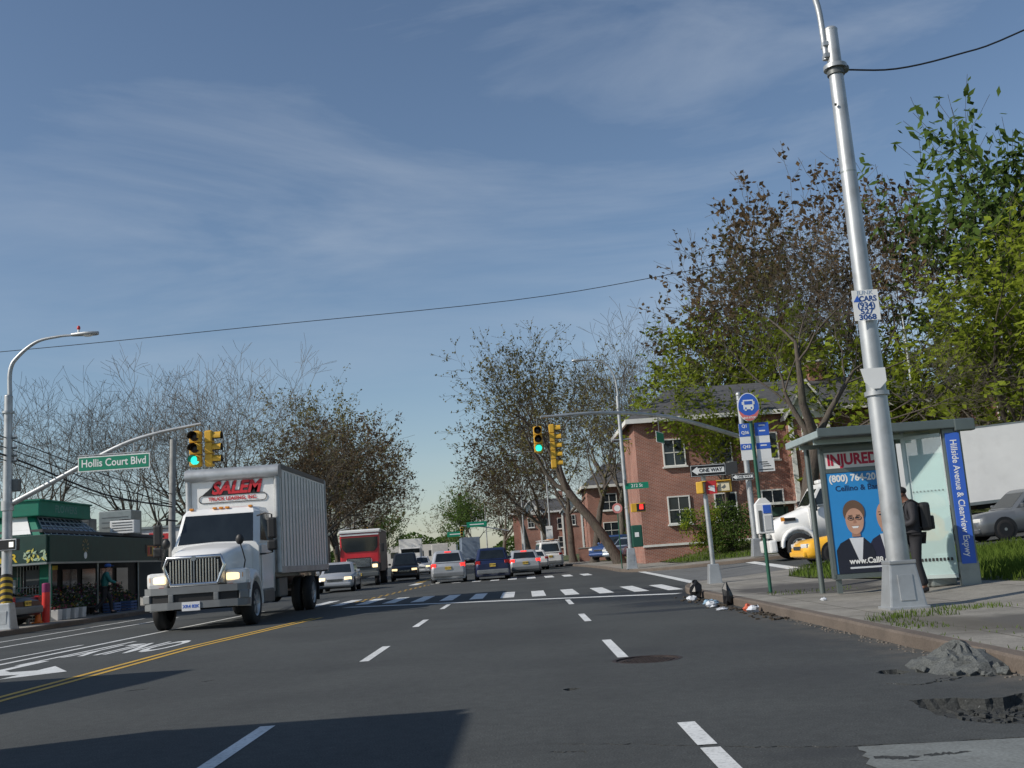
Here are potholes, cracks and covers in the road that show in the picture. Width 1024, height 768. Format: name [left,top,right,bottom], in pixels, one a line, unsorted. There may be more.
pothole [908,693,1024,724]
crack [886,677,962,685]
manhole cover [612,655,683,664]
